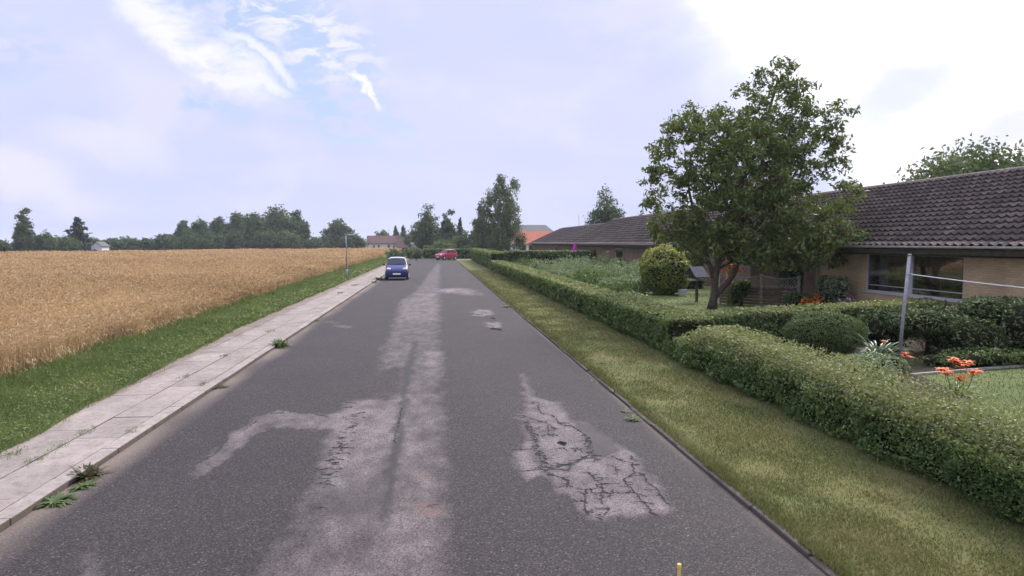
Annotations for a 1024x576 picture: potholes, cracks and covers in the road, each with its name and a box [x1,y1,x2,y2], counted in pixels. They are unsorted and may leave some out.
crack [195,402,365,508]
crack [511,401,671,521]
crack [393,407,403,444]
